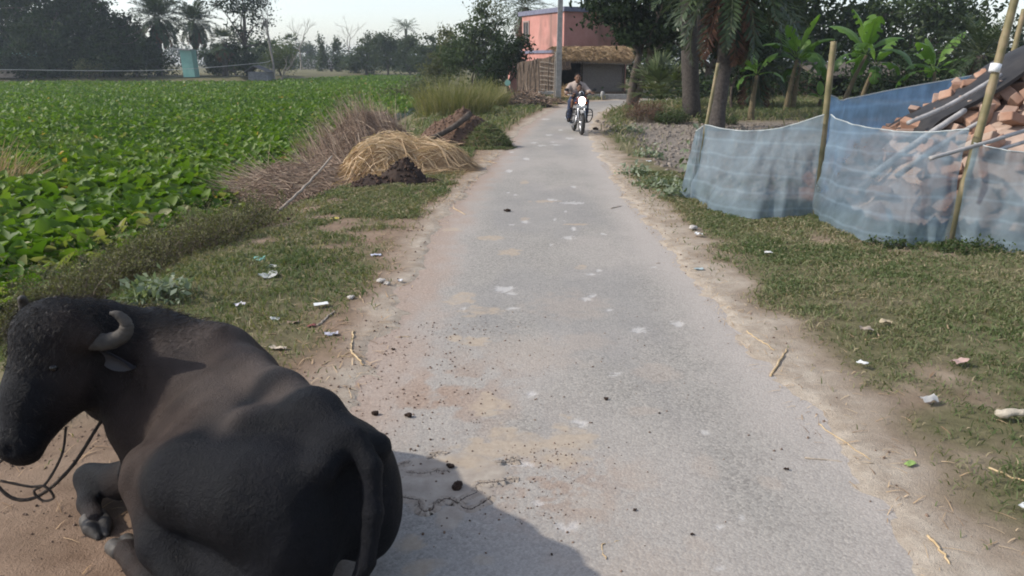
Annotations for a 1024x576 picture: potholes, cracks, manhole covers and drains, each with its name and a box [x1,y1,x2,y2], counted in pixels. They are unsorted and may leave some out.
crack [397,450,522,517]
